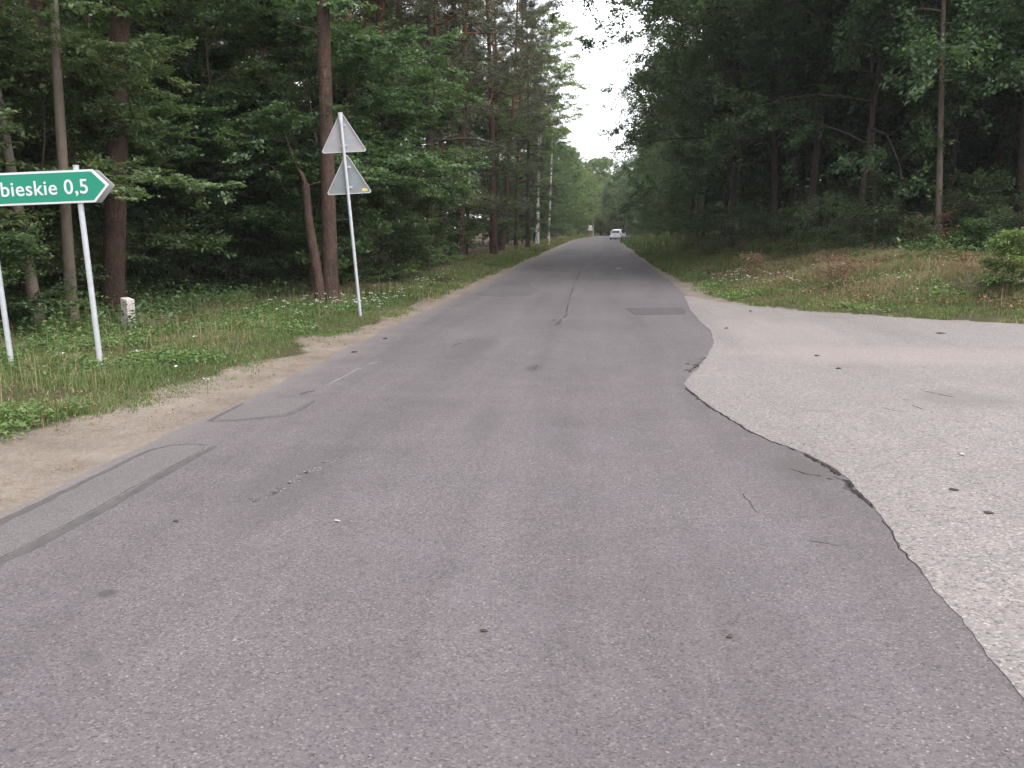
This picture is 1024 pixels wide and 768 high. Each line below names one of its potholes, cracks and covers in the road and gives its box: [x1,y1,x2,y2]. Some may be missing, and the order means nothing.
crack [553,265,584,326]
crack [683,357,923,575]
